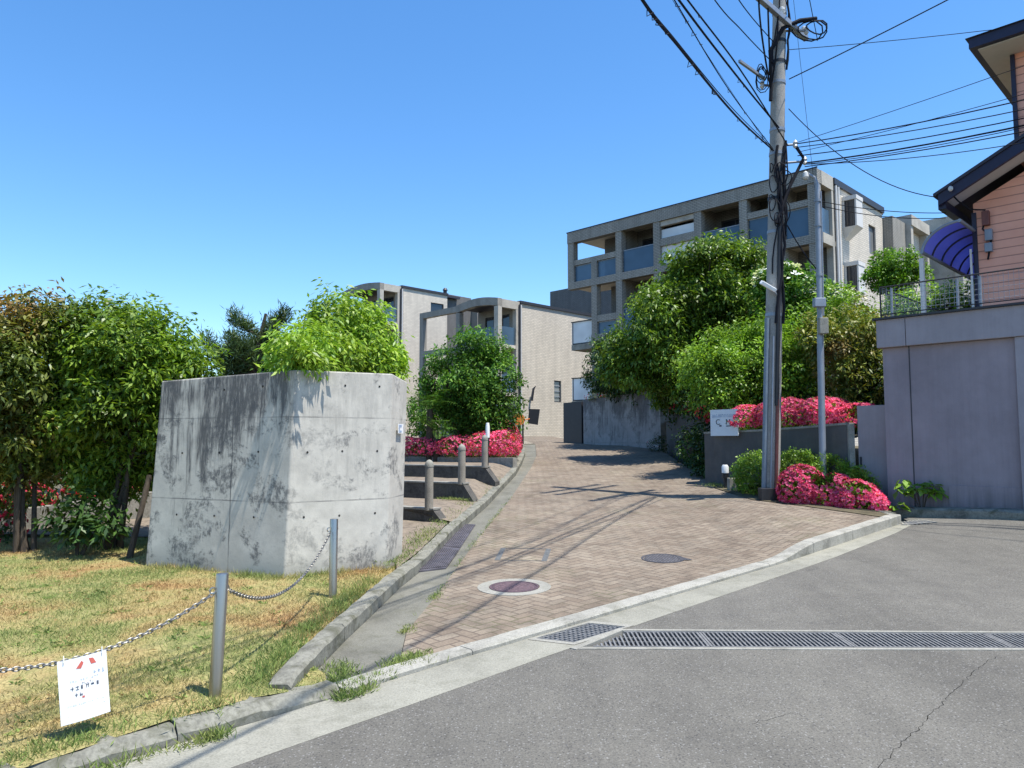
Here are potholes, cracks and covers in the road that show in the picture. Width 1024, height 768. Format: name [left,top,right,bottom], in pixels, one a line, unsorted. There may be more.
manhole cover [477,579,551,596]
crack [878,657,996,768]
drain grate [593,631,710,647]
drain grate [529,621,633,660]
drain grate [833,632,1014,648]
drain grate [698,632,853,647]
drain grate [443,524,476,550]
drain grate [984,633,1024,648]
manhole cover [641,554,692,563]
drain grate [419,547,459,572]
